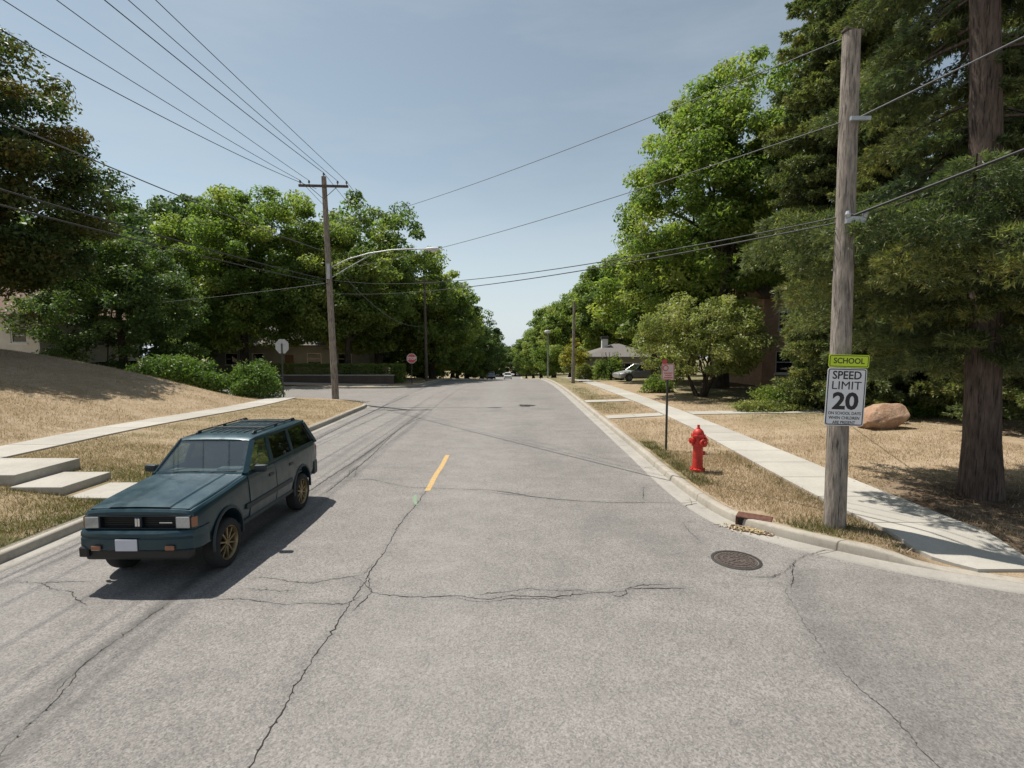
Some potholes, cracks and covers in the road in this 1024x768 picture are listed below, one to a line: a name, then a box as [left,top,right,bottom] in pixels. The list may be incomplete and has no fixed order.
manhole cover [711,550,763,570]
crack [228,479,680,768]
crack [21,581,86,604]
drain grate [729,511,773,537]
crack [3,606,164,750]
